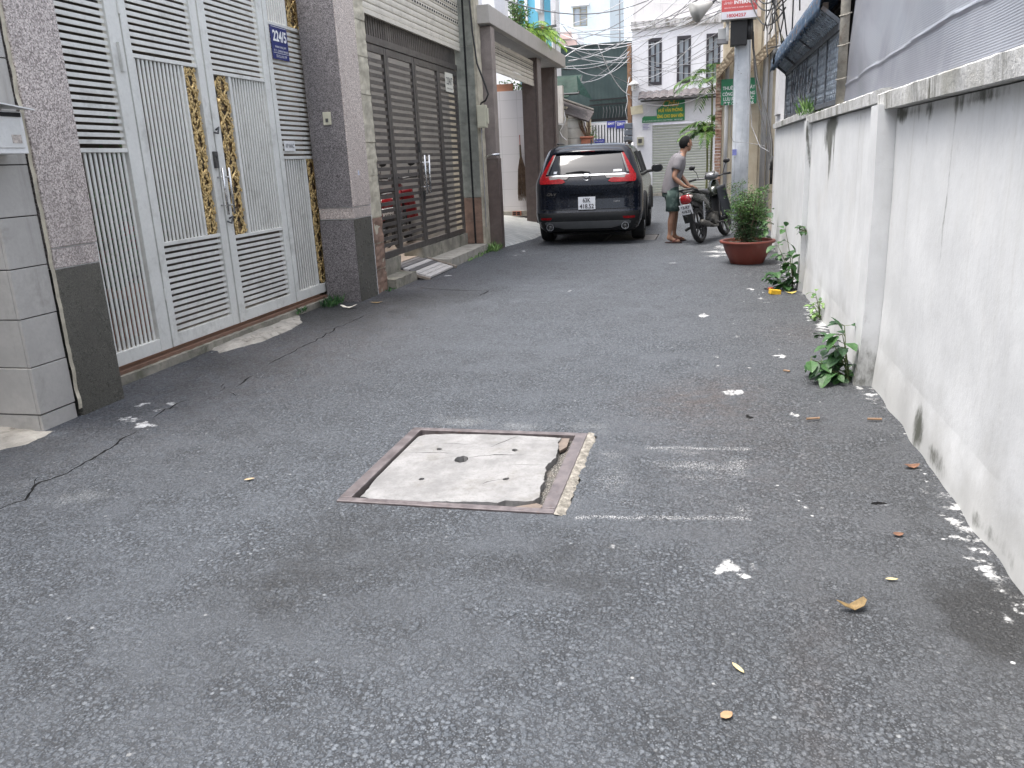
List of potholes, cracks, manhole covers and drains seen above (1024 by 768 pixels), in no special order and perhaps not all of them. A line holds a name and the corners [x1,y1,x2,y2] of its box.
crack [0,315,365,509]
manhole cover [337,427,596,516]
